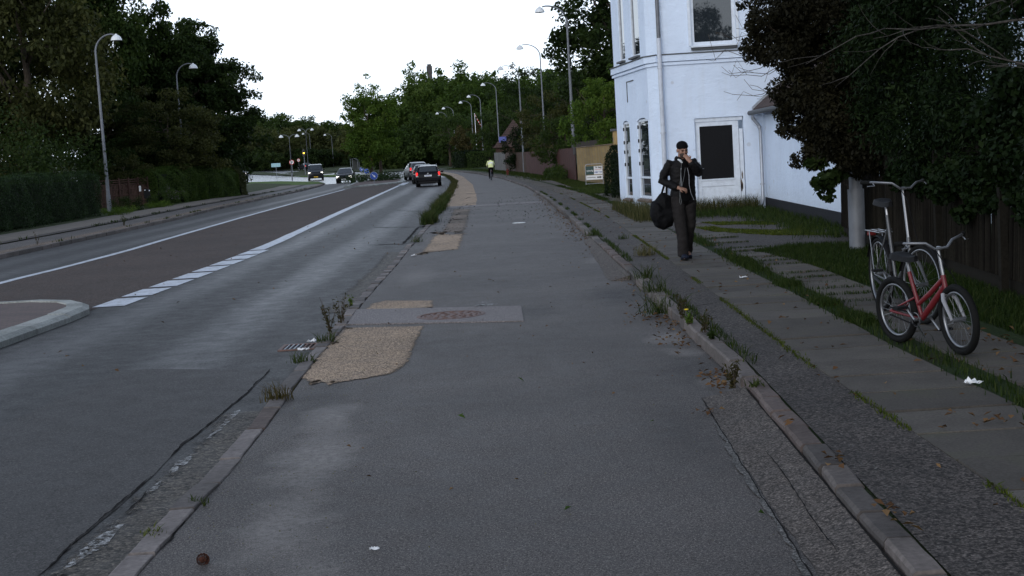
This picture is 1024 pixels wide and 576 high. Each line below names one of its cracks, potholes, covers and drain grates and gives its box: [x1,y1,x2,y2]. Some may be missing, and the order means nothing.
crack [703,400,837,576]
crack [44,369,270,573]
drain grate [277,343,318,352]
